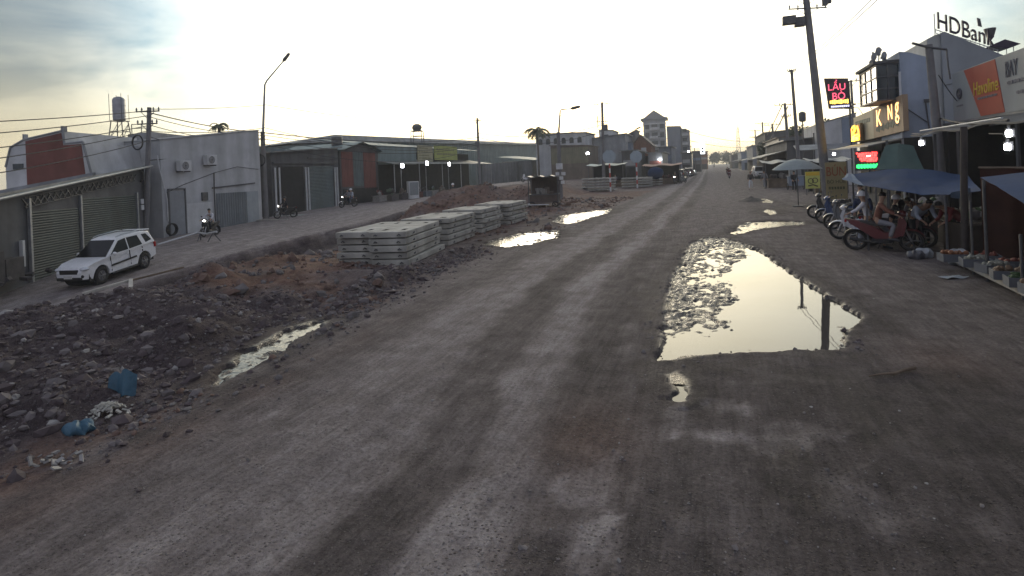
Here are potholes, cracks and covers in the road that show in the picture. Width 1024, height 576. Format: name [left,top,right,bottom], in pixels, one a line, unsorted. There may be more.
pothole [462,229,576,250]
pothole [534,208,629,226]
pothole [707,219,824,237]
pothole [607,235,914,385]
